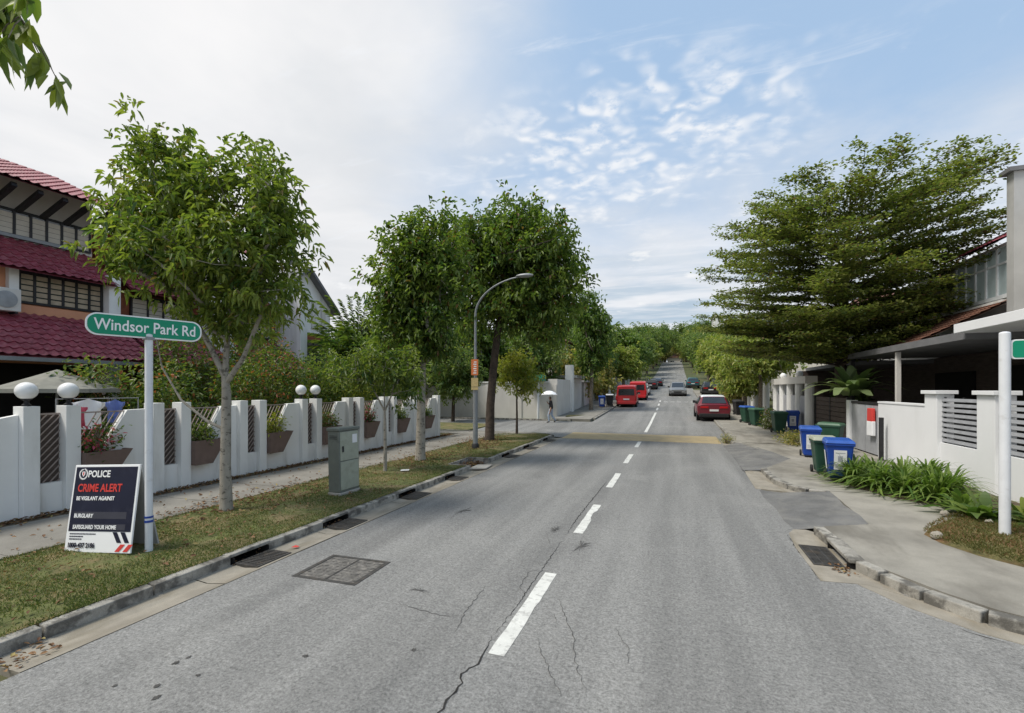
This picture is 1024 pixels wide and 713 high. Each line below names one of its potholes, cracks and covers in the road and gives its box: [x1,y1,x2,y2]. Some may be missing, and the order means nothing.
drain grate [230,544,292,568]
drain grate [323,514,368,530]
crack [408,485,604,713]
drain grate [399,489,431,500]
drain grate [798,543,856,570]
manhole cover [292,554,390,586]
